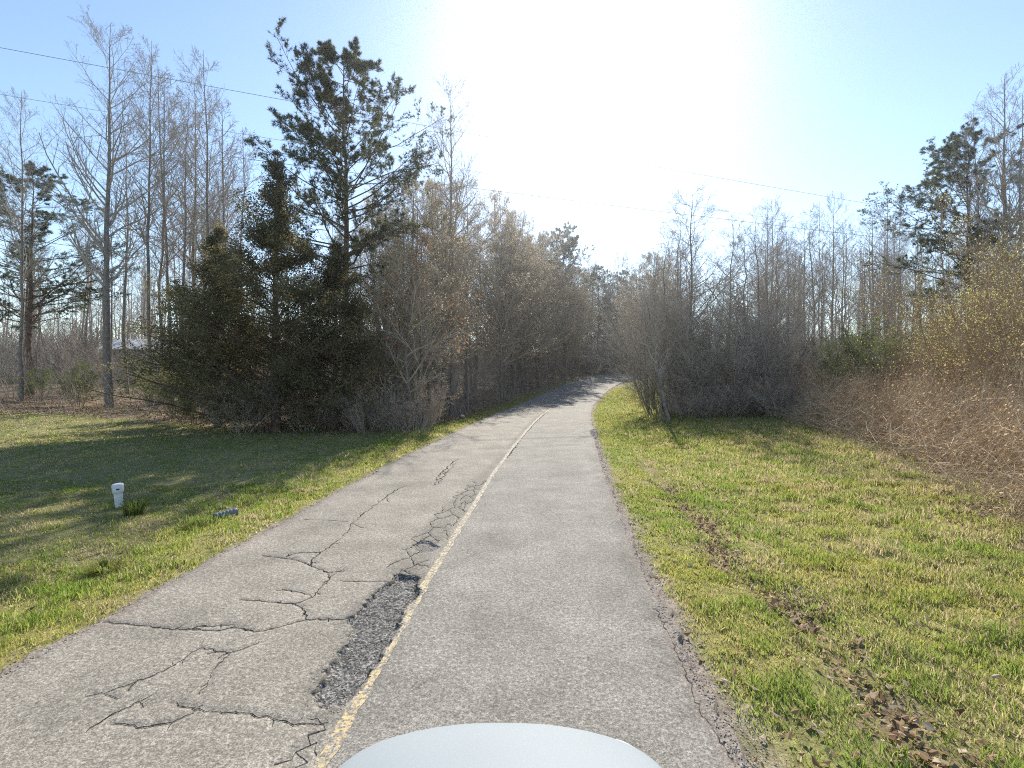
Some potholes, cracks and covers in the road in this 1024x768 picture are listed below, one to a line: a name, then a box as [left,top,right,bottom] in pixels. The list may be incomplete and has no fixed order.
crack [86,529,354,768]
crack [656,610,736,764]
pothole [311,575,420,710]
crack [347,459,484,582]
